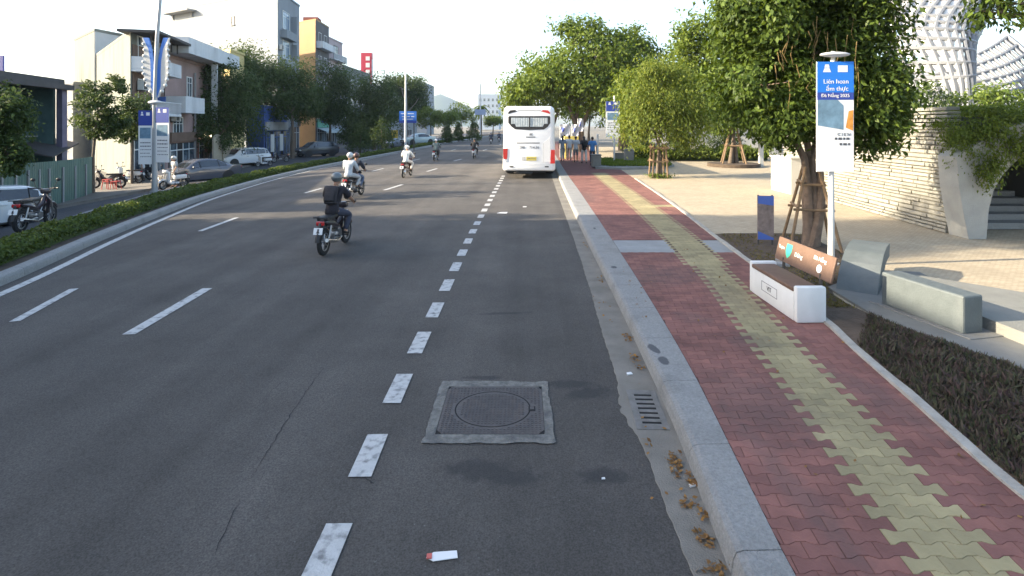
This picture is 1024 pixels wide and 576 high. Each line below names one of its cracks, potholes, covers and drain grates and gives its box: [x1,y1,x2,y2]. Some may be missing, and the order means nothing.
drain grate [626,390,670,430]
crack [258,375,319,466]
manhole cover [421,380,556,444]
